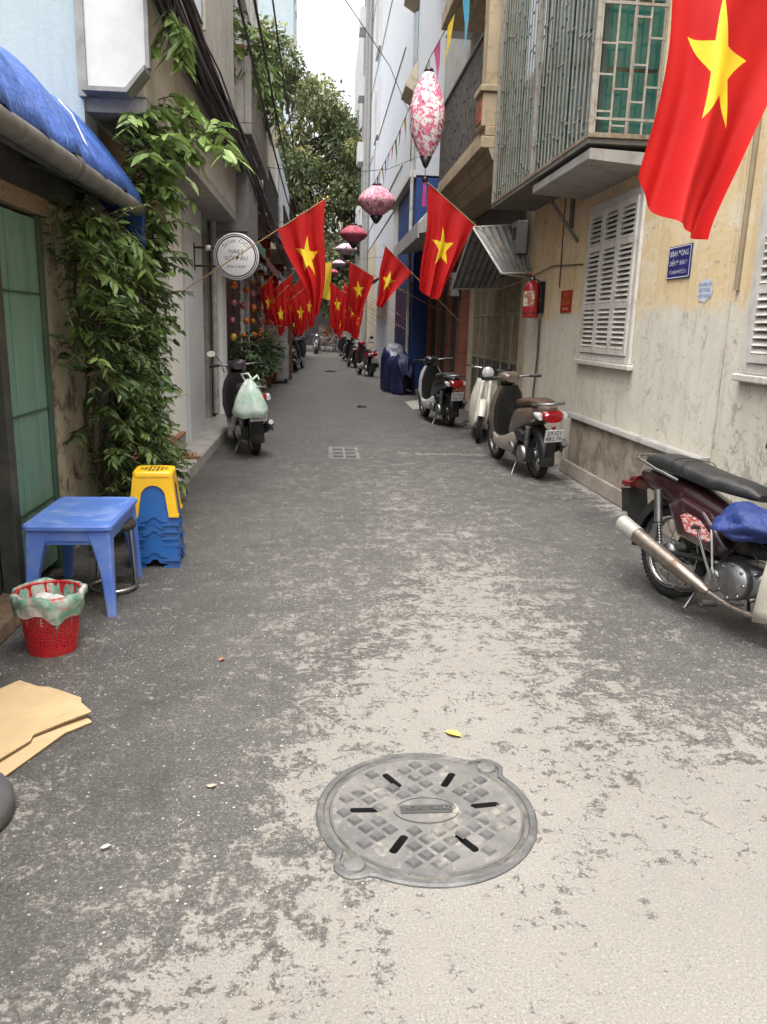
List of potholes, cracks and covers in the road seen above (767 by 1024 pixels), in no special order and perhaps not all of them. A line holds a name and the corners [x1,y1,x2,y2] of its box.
manhole cover [316,753,538,889]
